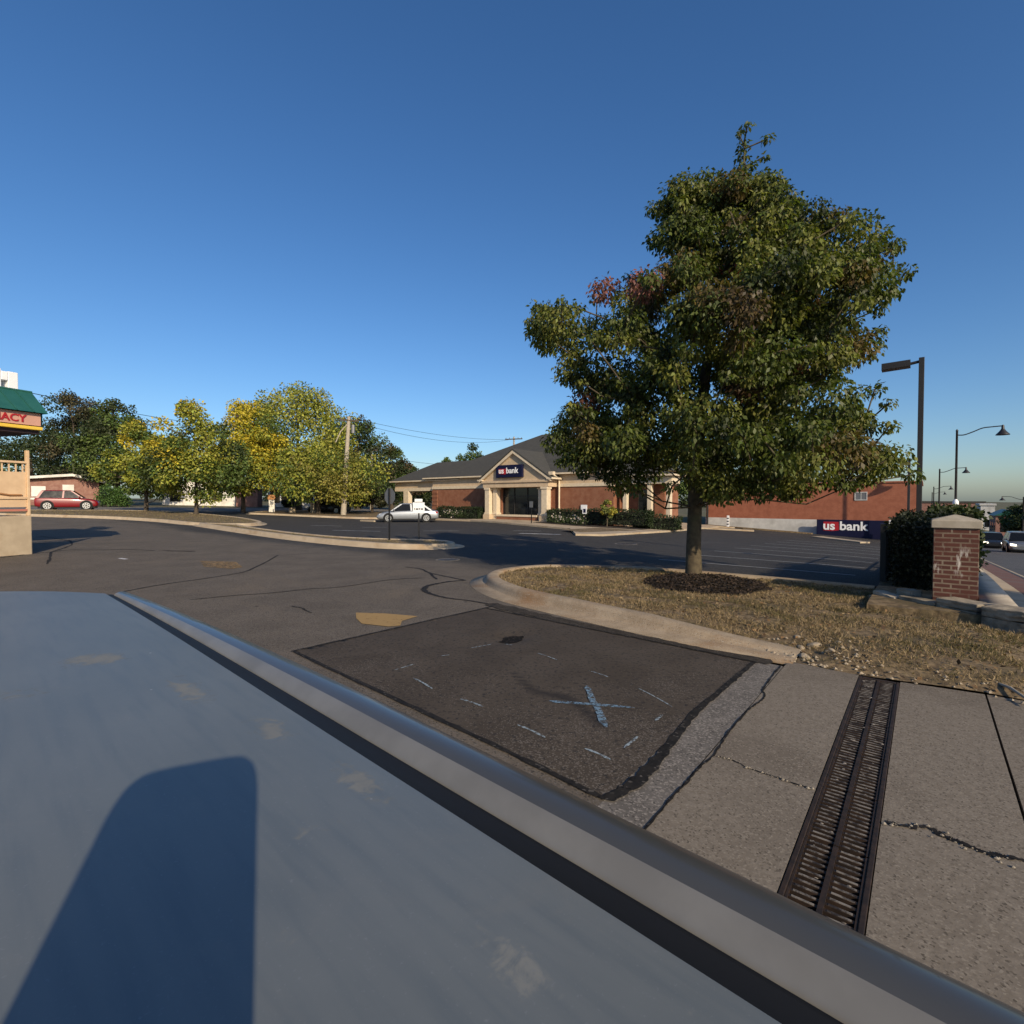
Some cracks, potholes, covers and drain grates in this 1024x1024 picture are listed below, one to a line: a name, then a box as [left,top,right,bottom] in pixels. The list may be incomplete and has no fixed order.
crack [882,820,1024,868]
crack [643,665,814,830]
drain grate [778,676,900,936]
